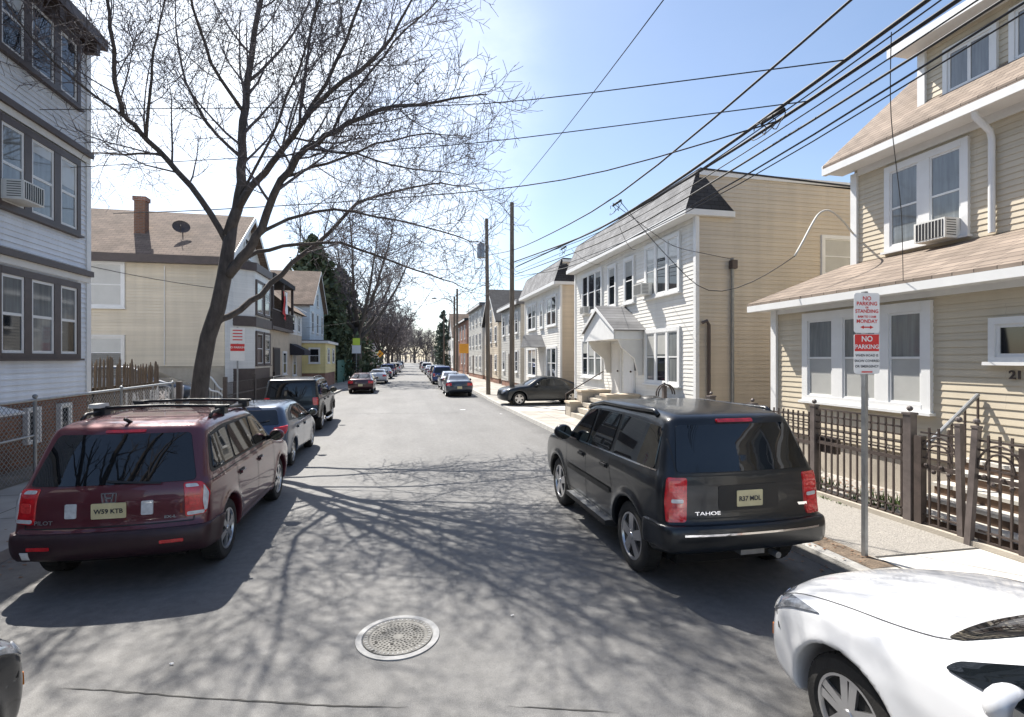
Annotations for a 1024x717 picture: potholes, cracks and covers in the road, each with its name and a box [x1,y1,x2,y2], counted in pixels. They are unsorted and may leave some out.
manhole cover [355,615,440,661]
